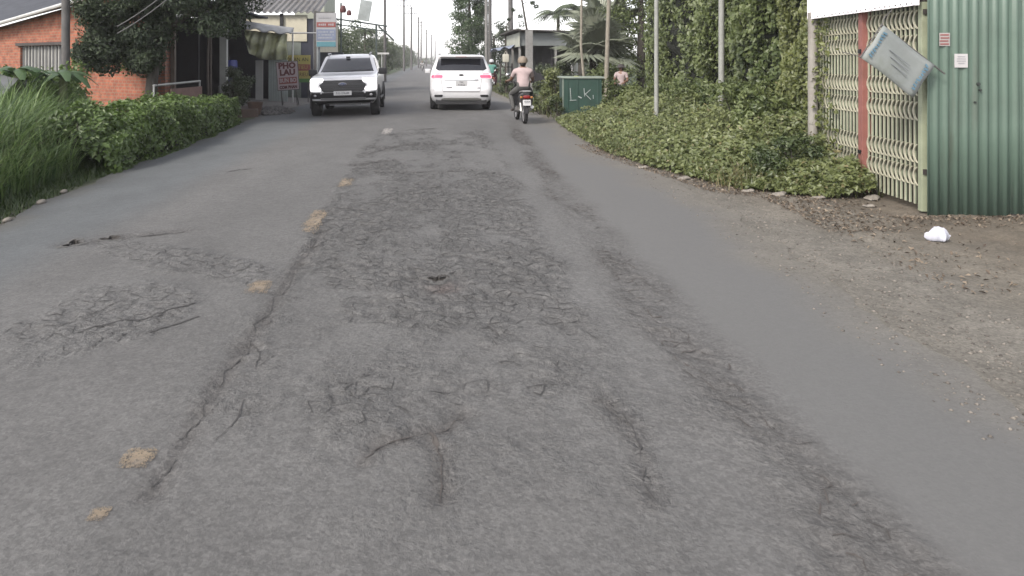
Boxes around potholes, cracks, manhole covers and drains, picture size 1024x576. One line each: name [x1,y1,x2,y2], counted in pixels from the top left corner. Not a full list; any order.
pothole [422,274,455,284]
crack [6,231,266,350]
crack [151,232,325,488]
crack [259,128,622,423]
crack [365,418,461,501]
